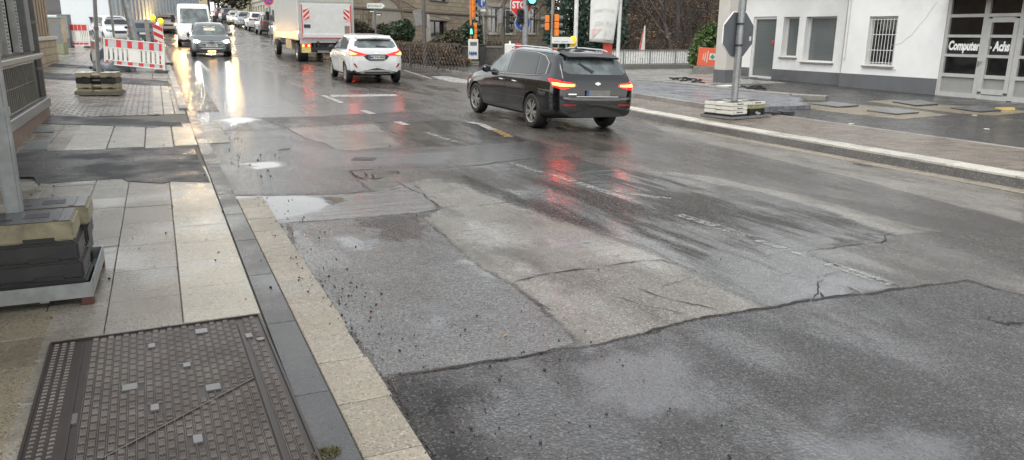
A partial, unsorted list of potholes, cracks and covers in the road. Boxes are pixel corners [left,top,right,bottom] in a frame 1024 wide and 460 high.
crack [813,271,860,299]
crack [515,255,677,282]
crack [611,278,723,320]
manhole cover [17,313,322,460]
crack [980,315,1024,325]
